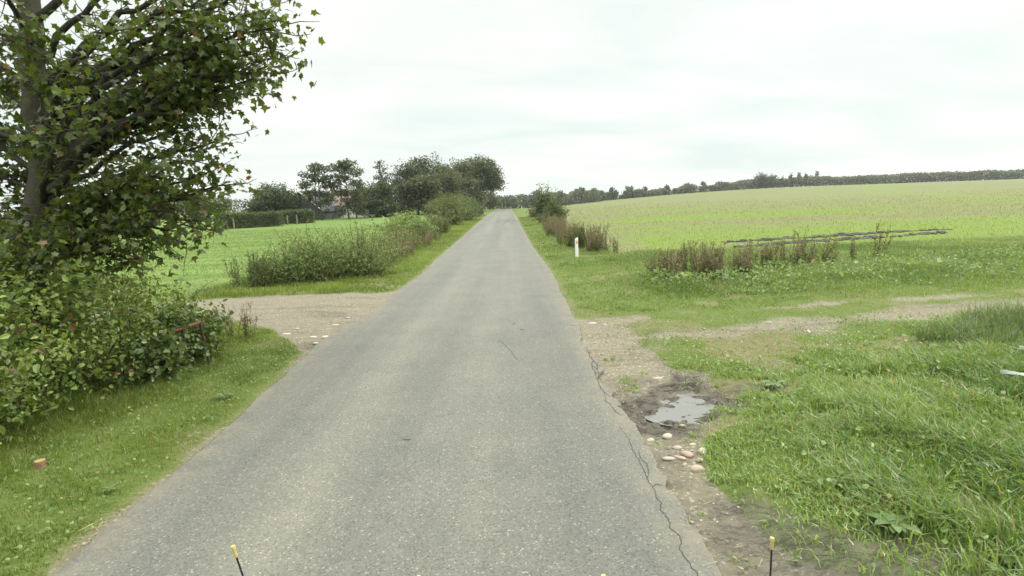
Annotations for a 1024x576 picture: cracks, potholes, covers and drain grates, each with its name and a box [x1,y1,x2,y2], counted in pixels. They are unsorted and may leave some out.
crack [586,348,620,415]
crack [621,429,698,575]
